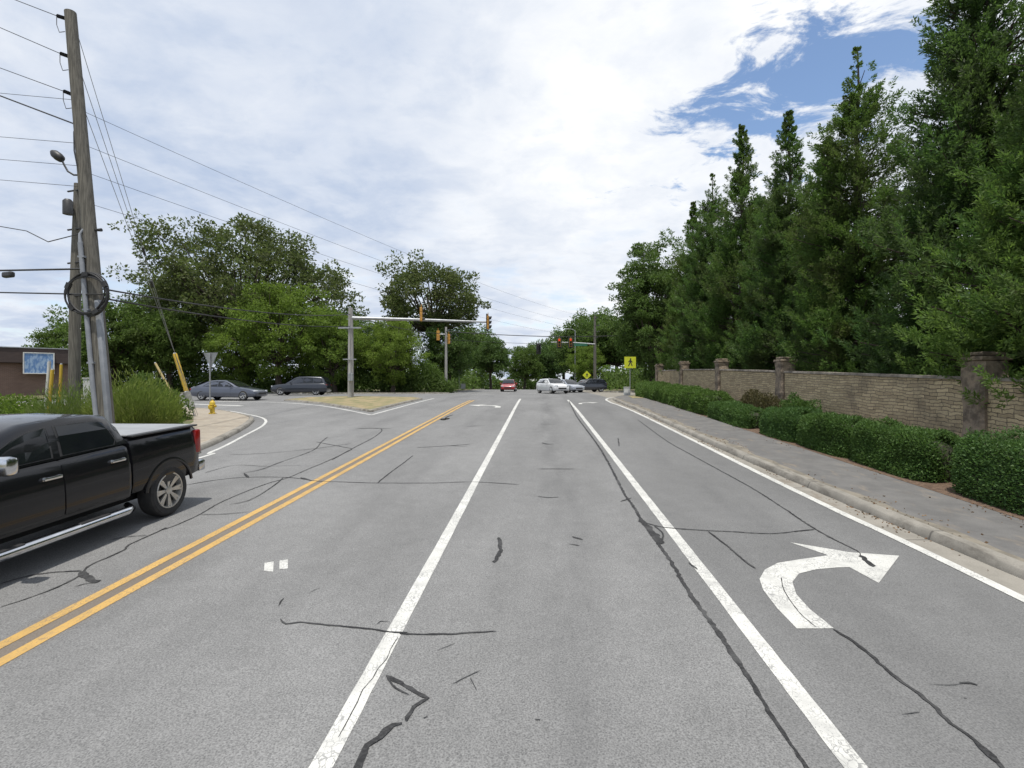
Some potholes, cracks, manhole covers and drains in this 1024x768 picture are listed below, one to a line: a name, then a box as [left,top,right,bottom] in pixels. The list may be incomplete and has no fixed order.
crack [641,422,876,567]
crack [278,598,491,737]
crack [1,428,519,607]
